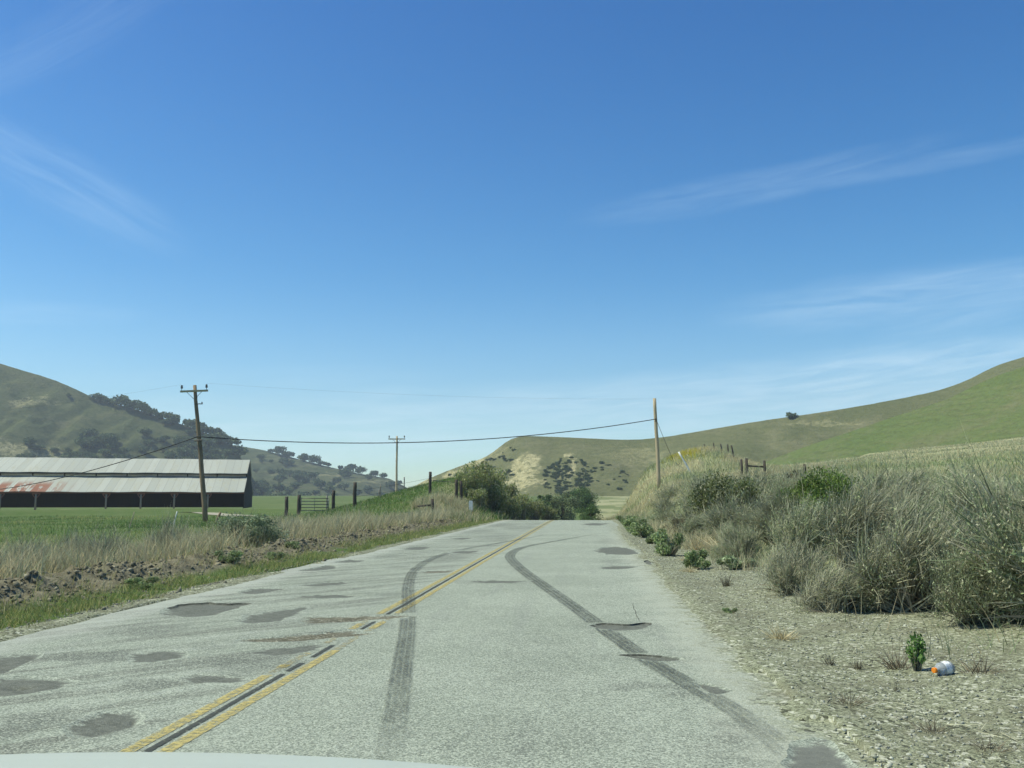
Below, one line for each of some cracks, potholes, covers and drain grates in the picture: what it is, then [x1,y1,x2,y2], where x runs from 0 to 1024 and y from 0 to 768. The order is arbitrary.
pothole [159,602,252,617]
